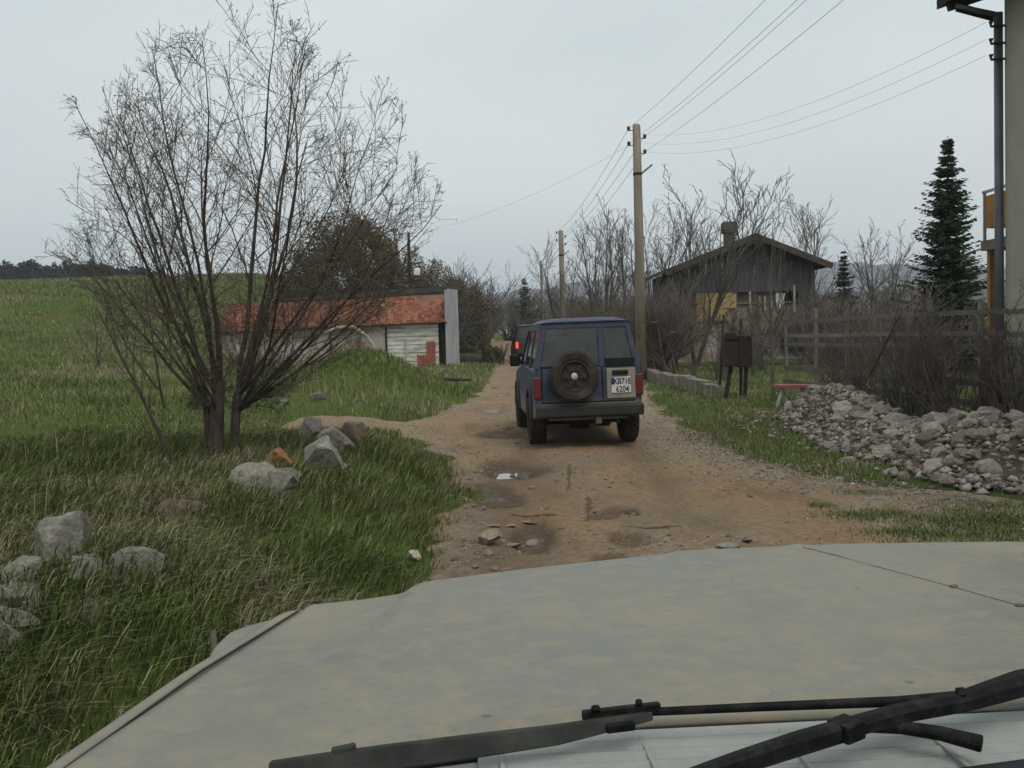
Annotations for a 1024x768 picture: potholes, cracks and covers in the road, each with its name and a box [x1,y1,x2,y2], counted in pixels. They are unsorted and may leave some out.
pothole [513,527,556,555]
pothole [476,484,520,508]
pothole [594,509,622,520]
pothole [610,535,648,546]
pothole [486,461,543,479]
